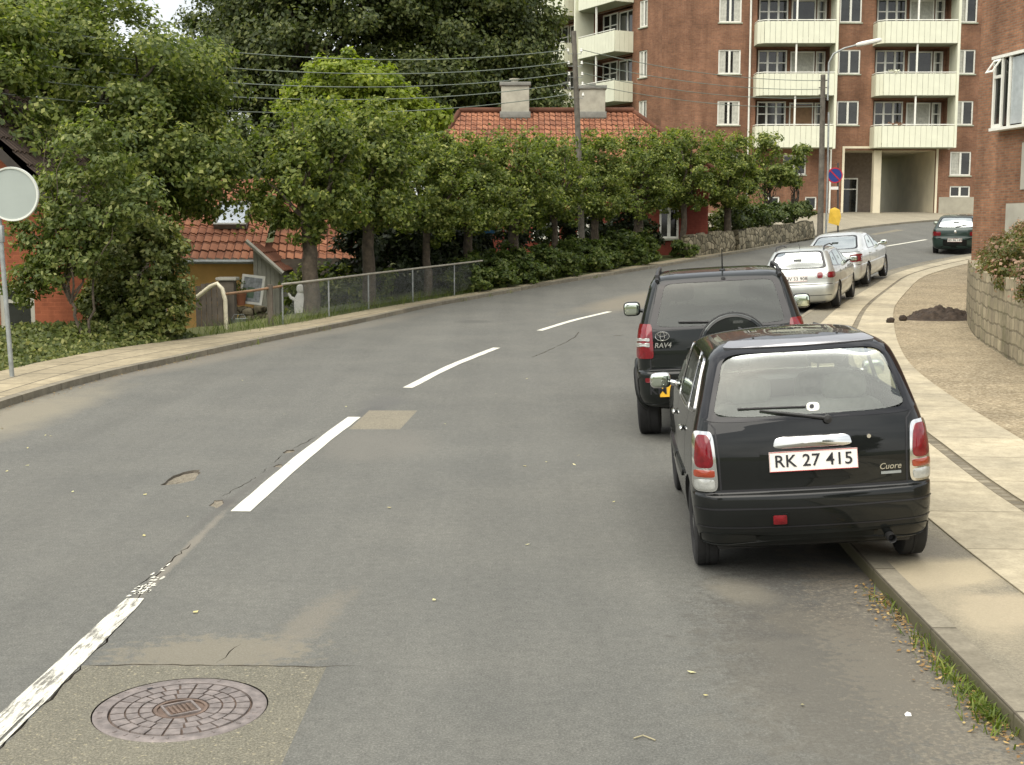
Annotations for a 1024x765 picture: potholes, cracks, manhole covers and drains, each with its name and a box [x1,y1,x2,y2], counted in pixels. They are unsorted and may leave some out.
pothole [161,470,200,485]
manhole cover [92,678,268,742]
